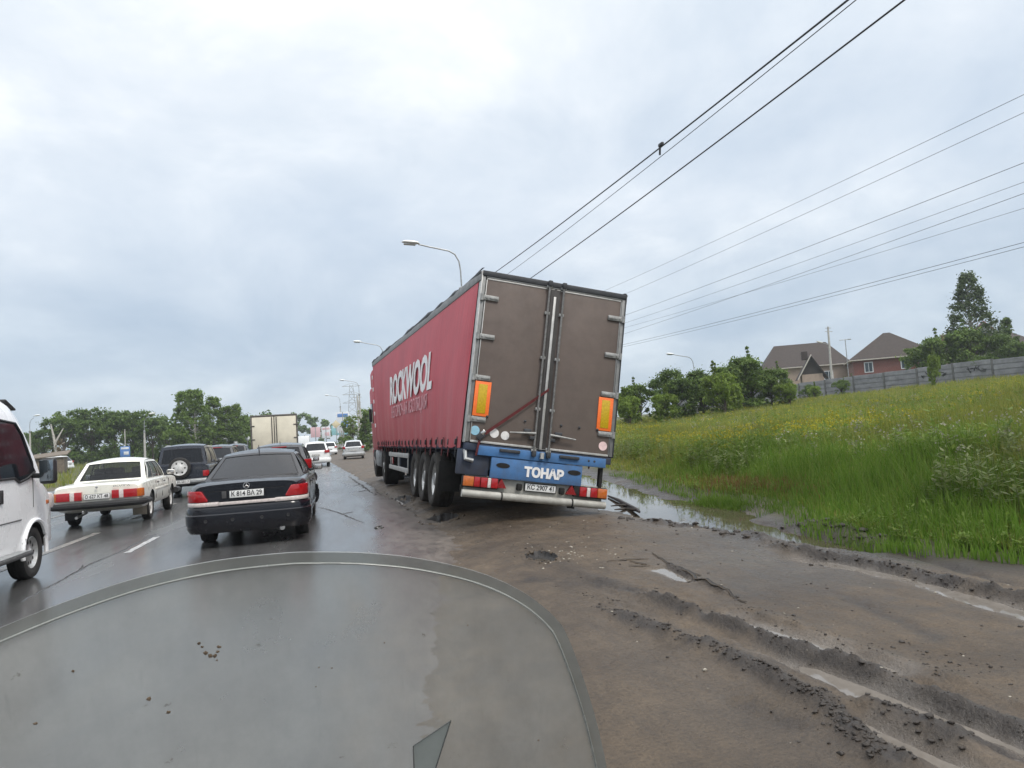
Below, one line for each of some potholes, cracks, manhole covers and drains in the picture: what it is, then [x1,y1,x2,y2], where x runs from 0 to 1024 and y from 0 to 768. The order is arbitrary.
pothole [418,511,465,525]
crack [608,552,746,602]
pothole [520,550,562,564]
